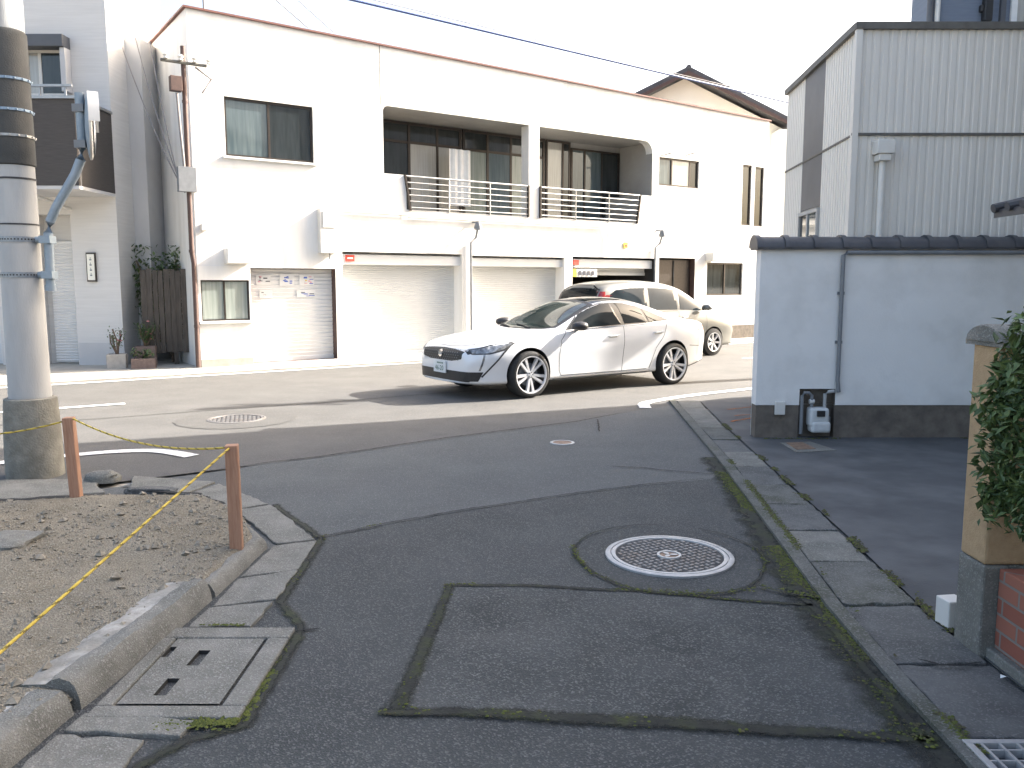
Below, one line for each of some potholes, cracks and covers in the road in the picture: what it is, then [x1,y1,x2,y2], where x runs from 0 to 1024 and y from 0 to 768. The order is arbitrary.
drain grate [962,739,1024,768]
manhole cover [605,535,735,579]
manhole cover [173,410,297,429]
